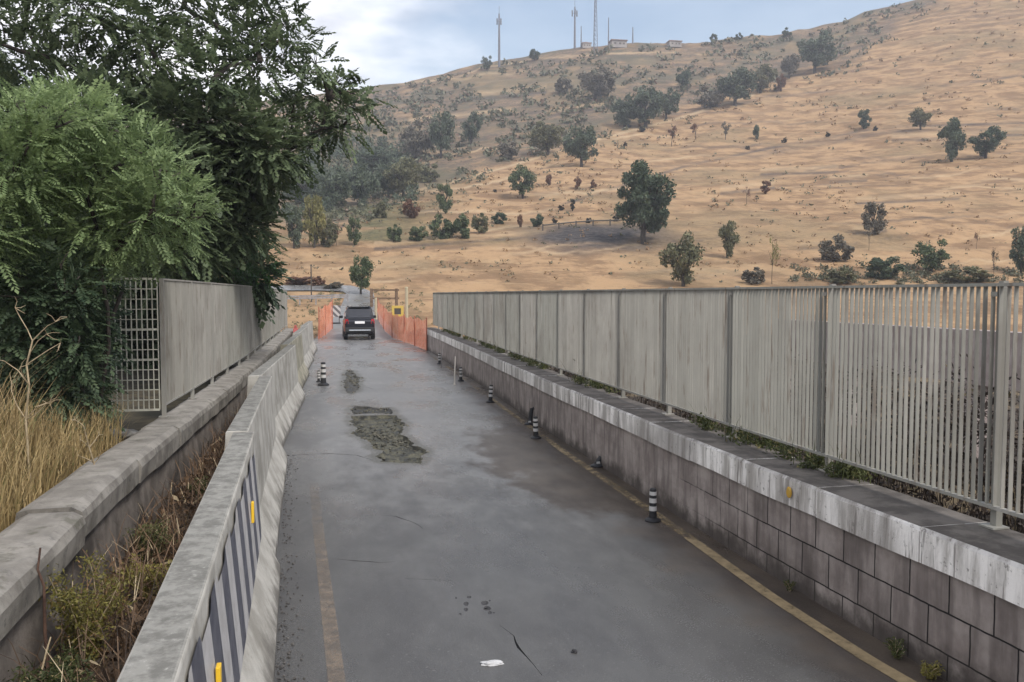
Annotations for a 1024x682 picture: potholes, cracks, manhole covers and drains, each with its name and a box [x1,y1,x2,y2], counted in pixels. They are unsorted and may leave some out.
pothole [341,370,363,394]
pothole [349,415,429,464]
pothole [350,406,393,414]
crack [406,578,542,675]
